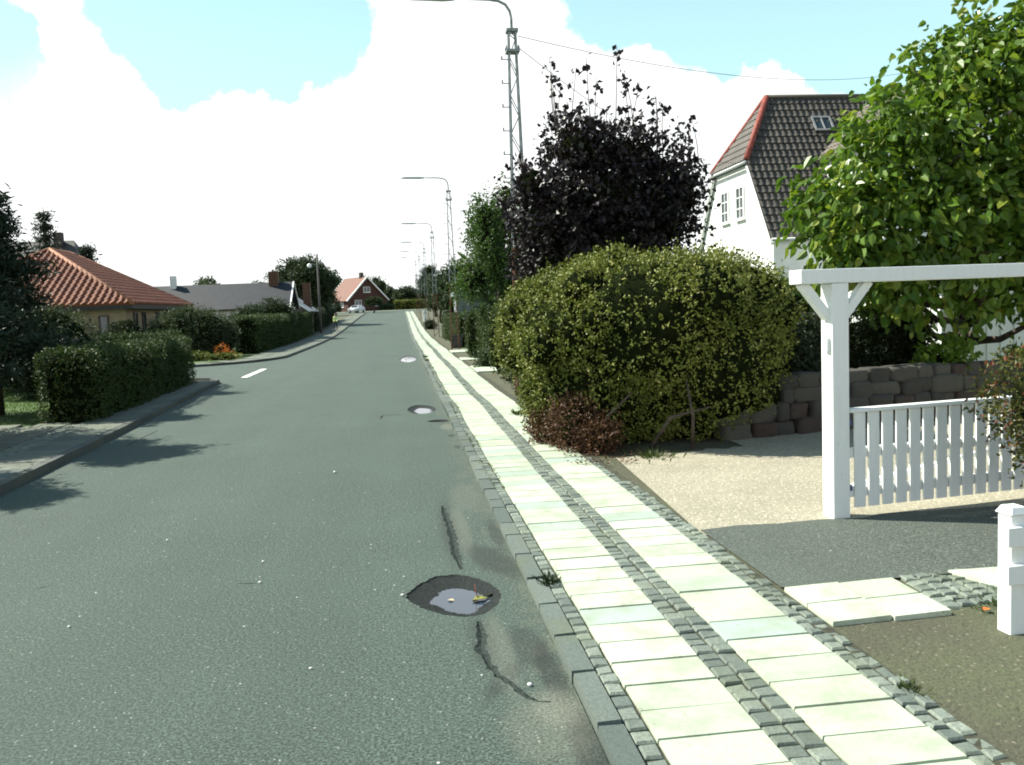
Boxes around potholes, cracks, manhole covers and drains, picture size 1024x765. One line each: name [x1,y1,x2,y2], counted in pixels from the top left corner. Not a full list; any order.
crack [441,506,463,569]
pothole [406,575,502,617]
crack [474,621,551,703]
